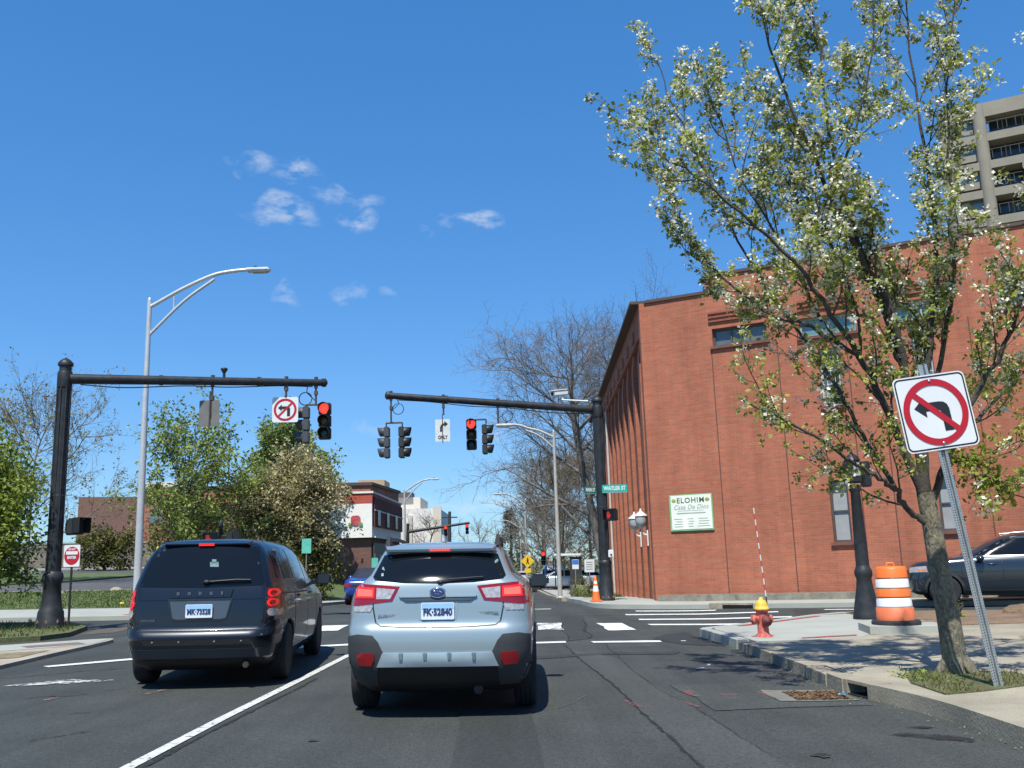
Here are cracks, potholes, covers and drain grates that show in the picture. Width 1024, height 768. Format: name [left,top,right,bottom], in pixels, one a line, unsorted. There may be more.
drain grate [761,678,890,701]
crack [561,620,705,768]
